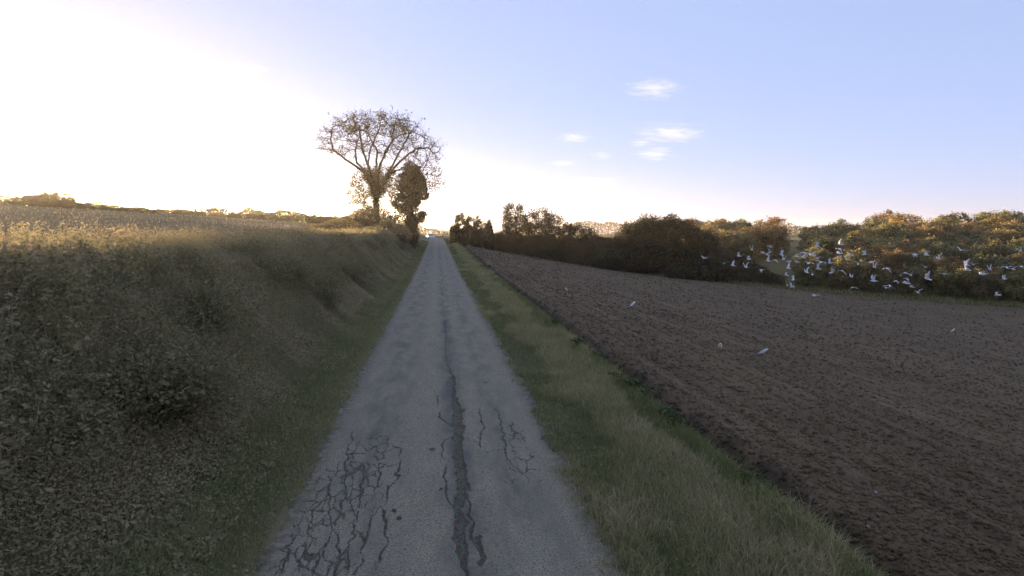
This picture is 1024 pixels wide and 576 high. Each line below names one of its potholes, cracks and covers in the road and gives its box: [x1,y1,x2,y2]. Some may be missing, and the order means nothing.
crack [268,432,402,576]
crack [436,396,457,515]
crack [472,408,544,484]
